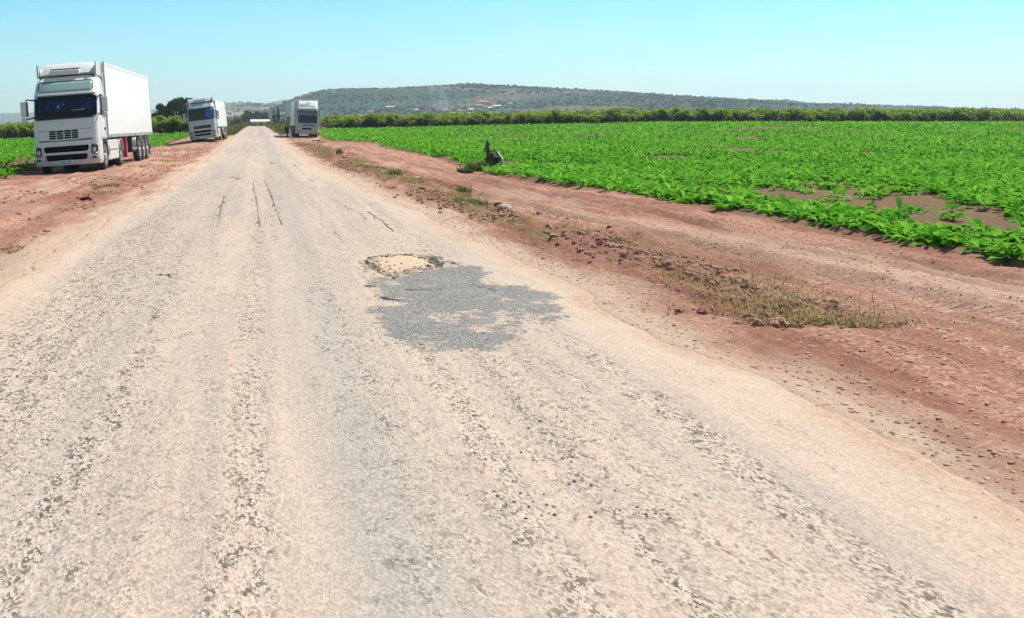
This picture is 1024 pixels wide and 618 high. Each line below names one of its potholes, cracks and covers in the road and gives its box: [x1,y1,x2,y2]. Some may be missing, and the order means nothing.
pothole [359,251,458,279]
crack [229,162,282,227]
